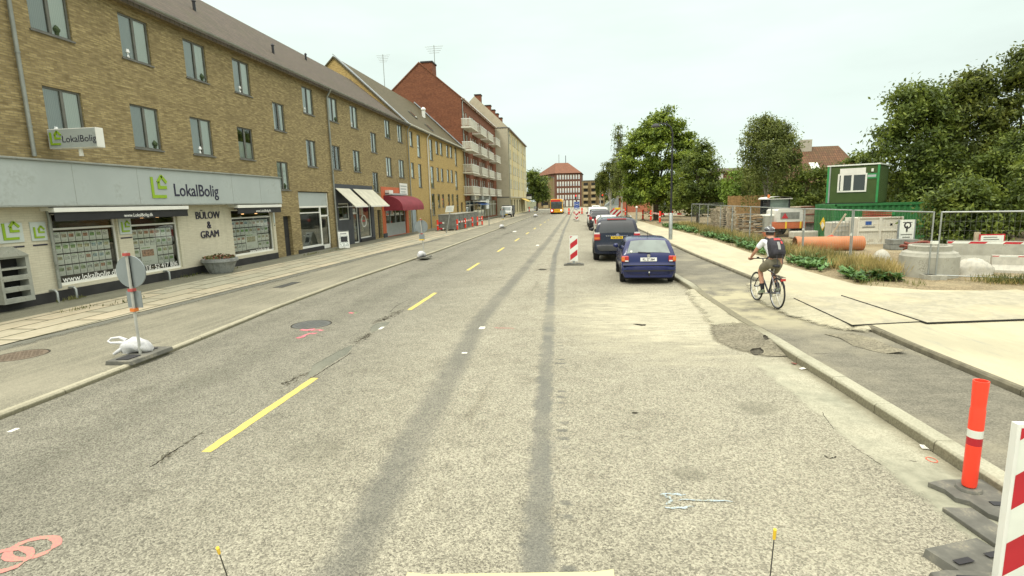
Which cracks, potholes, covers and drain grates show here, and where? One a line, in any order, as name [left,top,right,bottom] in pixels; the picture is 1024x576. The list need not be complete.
manhole cover [290,320,332,329]
manhole cover [0,349,51,362]
